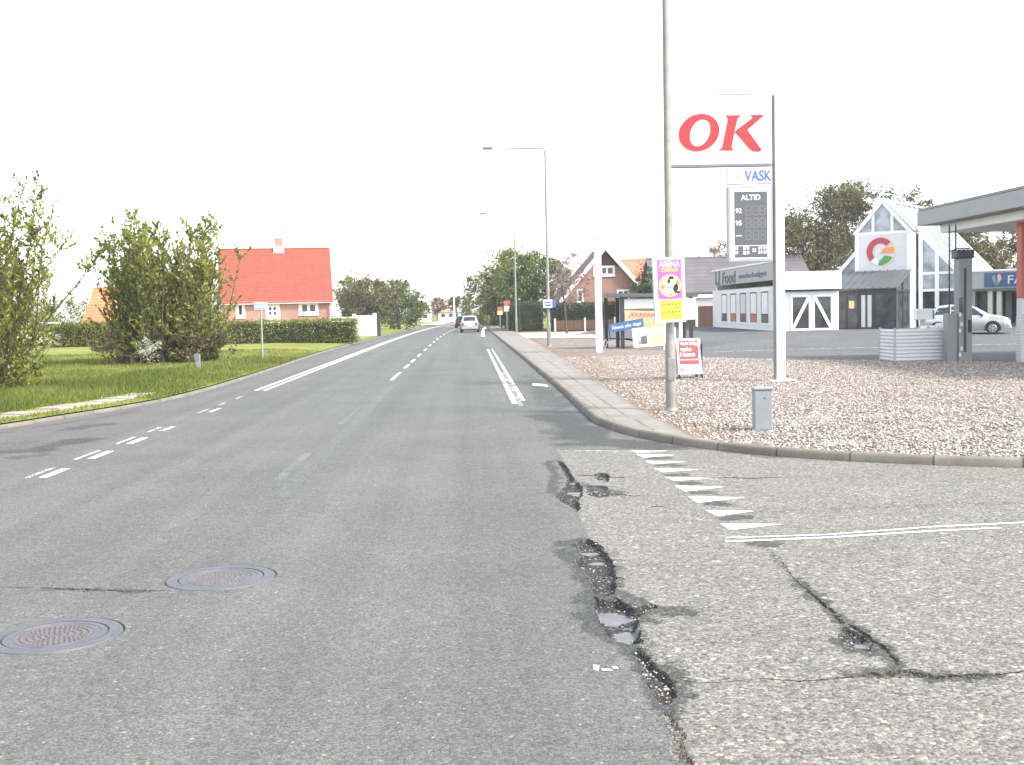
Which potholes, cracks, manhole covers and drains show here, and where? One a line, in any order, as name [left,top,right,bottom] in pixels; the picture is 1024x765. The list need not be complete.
pothole [569,538,619,596]
pothole [593,473,611,482]
crack [684,562,1024,683]
pothole [590,596,658,645]
pothole [837,627,875,652]
pothole [556,460,584,512]
manhole cover [0,617,125,655]
pothole [631,647,678,705]
manhole cover [164,565,277,591]
pothole [586,485,611,498]
